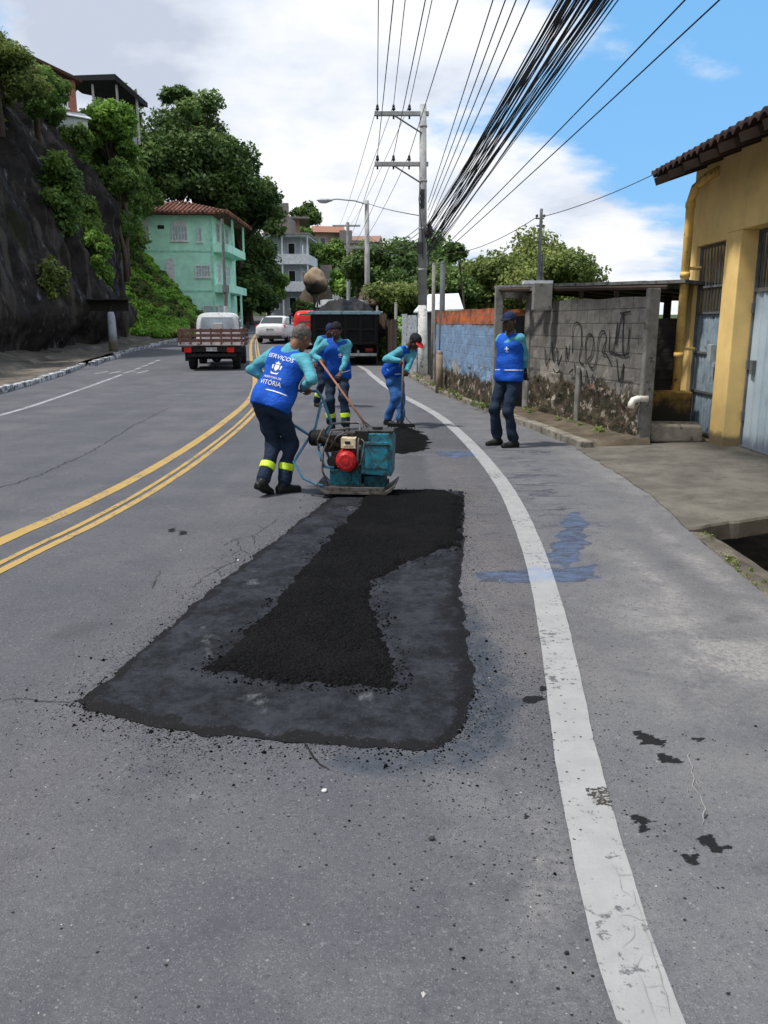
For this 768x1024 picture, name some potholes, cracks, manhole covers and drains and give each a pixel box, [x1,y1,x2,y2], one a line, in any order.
crack [152,519,276,587]
crack [303,740,328,769]
crack [687,752,706,824]
